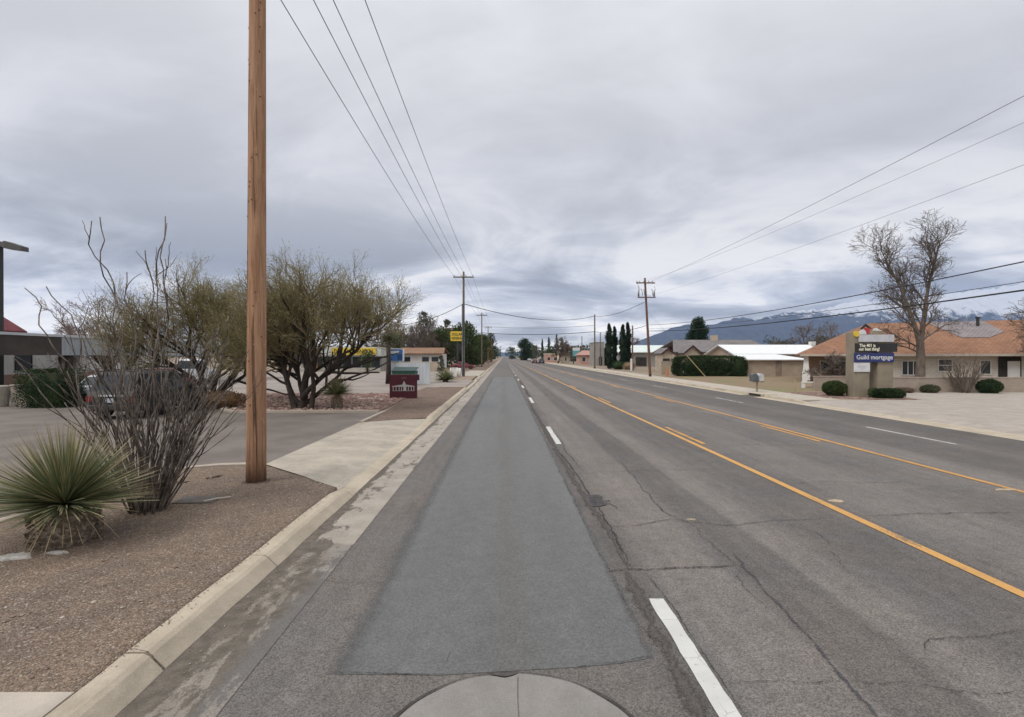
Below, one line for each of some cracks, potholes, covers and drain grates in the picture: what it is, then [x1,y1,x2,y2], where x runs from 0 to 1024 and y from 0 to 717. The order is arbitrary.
crack [646,573,1013,717]
crack [582,466,828,607]
manhole cover [392,671,634,717]
